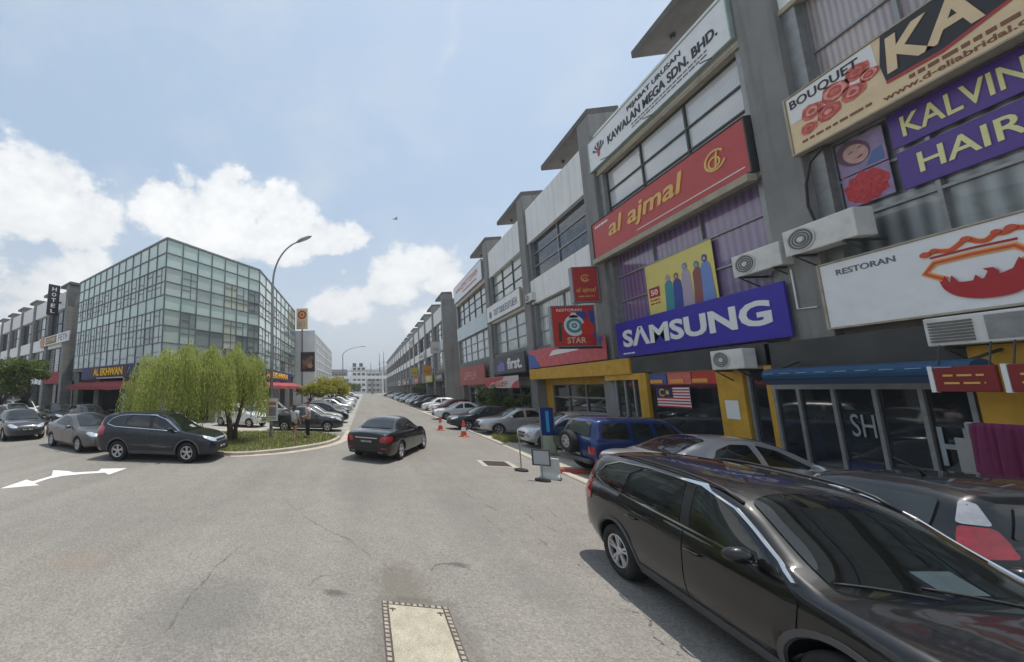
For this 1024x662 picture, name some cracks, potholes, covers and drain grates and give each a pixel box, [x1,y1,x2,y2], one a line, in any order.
manhole cover [382,601,469,662]
crack [164,549,237,633]
